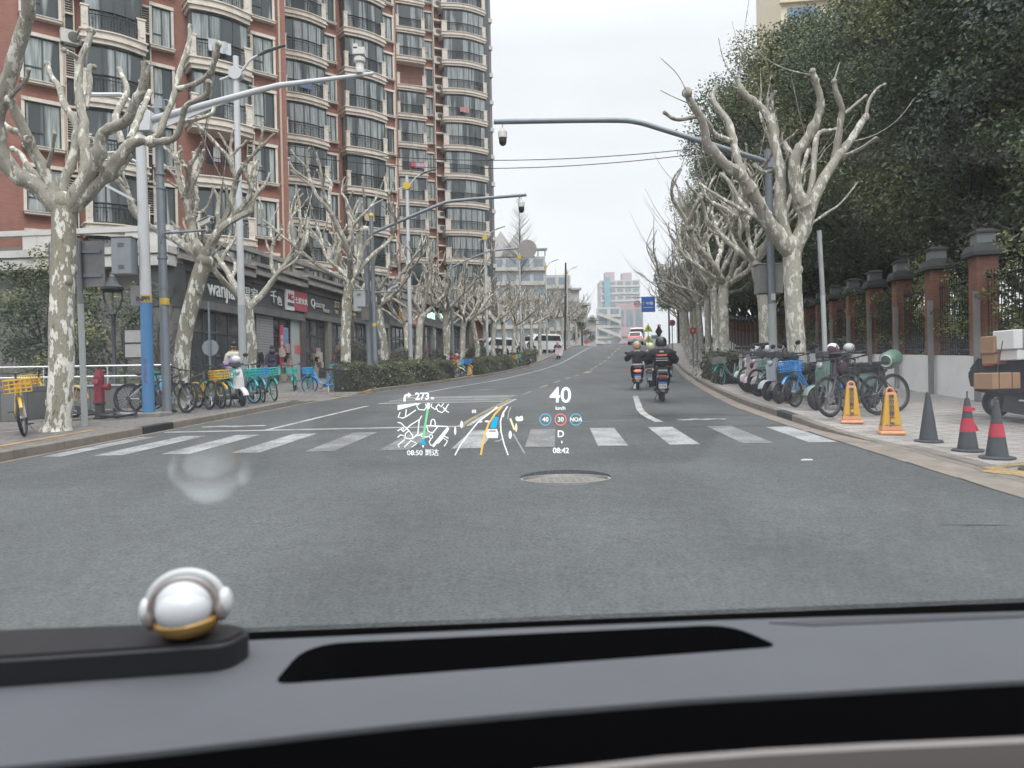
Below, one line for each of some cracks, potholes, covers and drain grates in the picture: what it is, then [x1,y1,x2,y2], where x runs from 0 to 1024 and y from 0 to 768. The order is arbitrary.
manhole cover [520,474,611,485]
